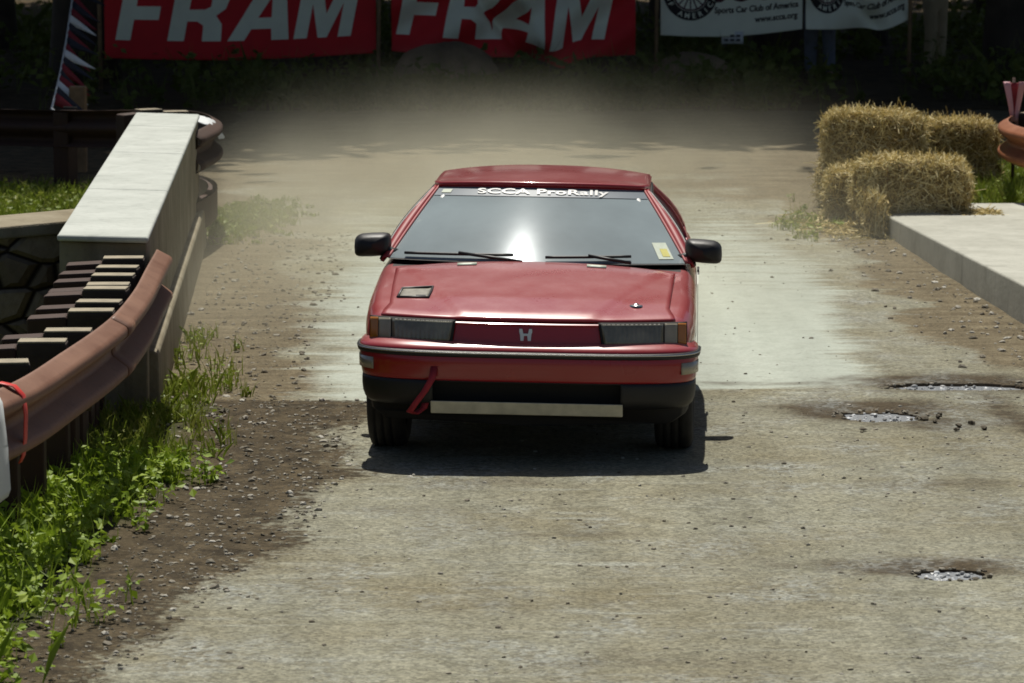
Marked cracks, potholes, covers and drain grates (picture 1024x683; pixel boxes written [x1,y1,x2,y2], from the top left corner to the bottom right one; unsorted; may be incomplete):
pothole [831,409,930,422]
pothole [878,381,1024,391]
pothole [910,567,993,582]
